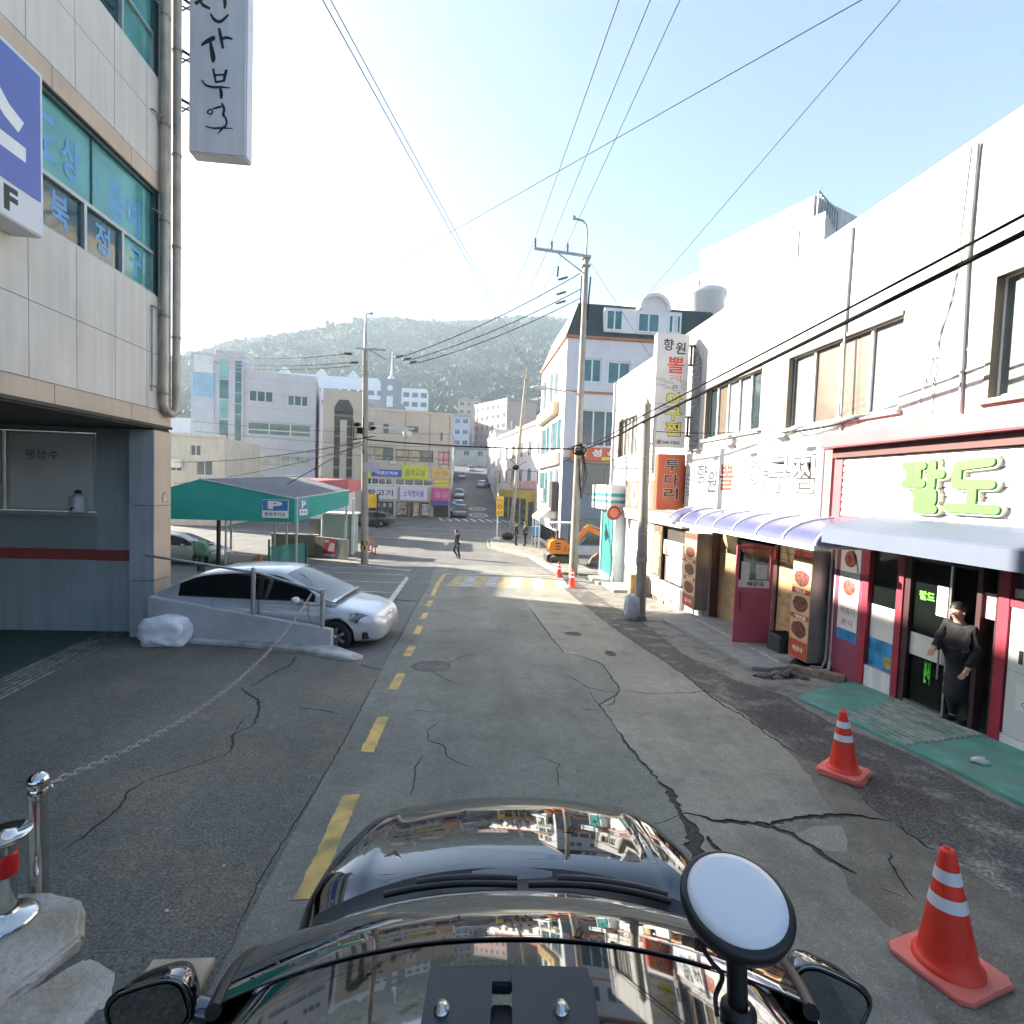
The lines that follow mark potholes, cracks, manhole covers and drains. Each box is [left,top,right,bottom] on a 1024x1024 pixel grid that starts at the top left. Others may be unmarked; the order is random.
crack [410,710,473,796]
manhole cover [412,661,451,674]
crack [531,610,933,900]
crack [63,658,296,850]
